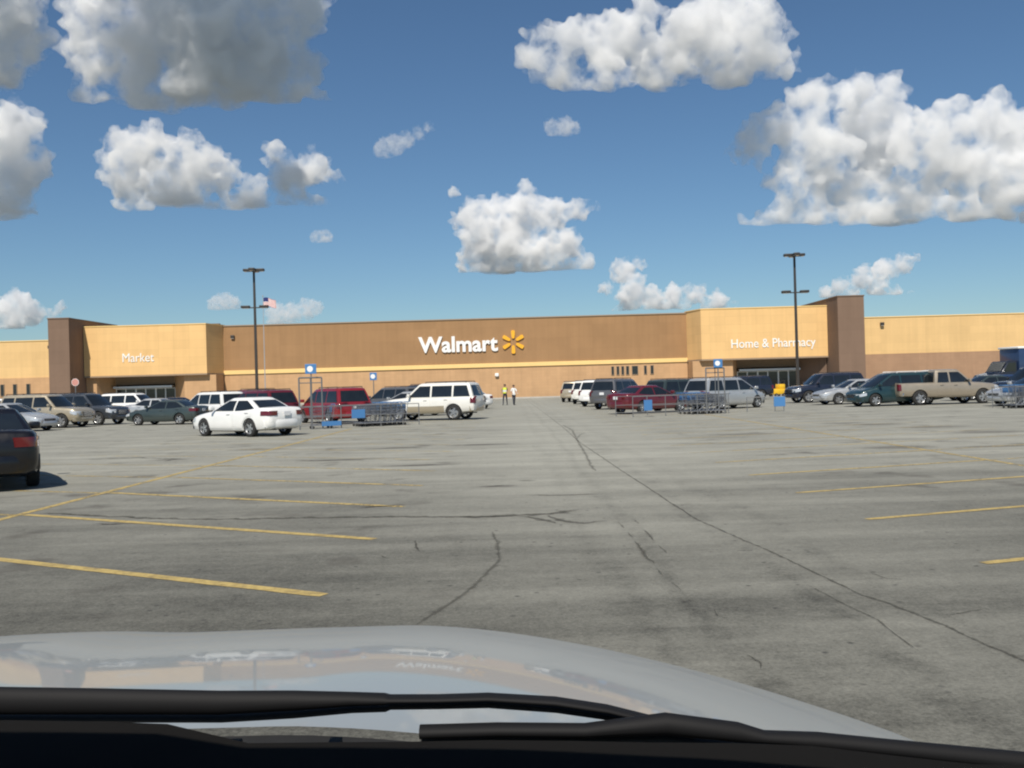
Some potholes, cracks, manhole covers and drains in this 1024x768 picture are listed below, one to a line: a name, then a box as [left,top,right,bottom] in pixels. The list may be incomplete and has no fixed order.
crack [542,411,1023,660]
crack [49,494,597,524]
